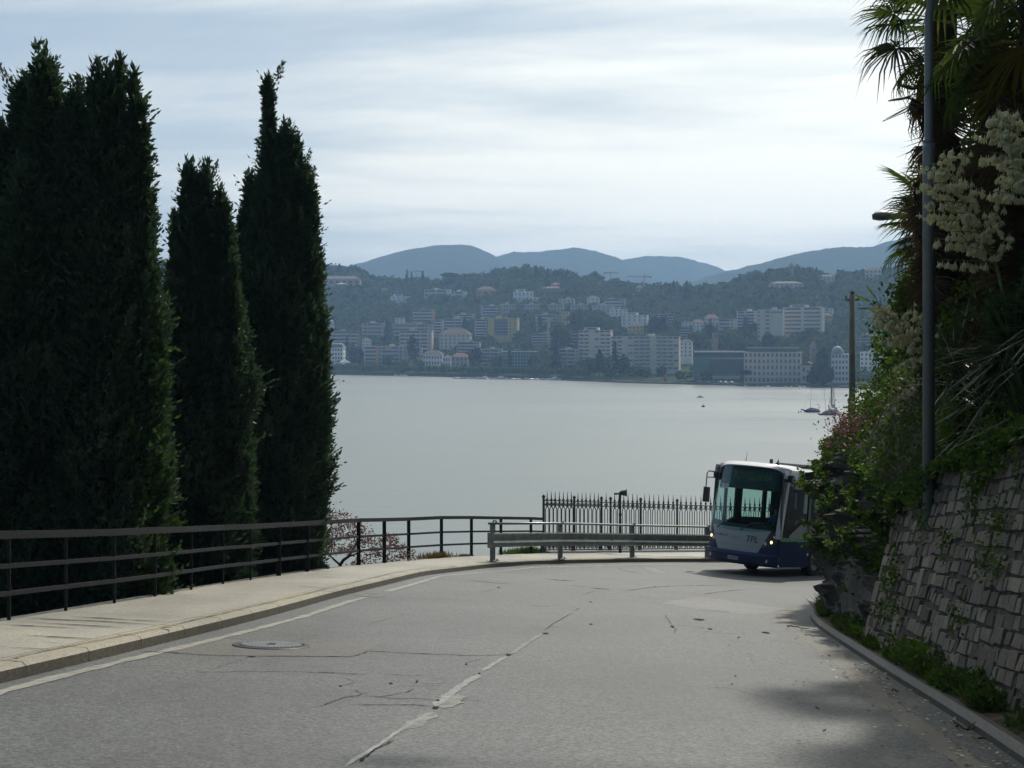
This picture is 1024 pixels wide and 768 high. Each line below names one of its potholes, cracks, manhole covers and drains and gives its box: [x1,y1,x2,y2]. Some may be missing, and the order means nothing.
crack [619,568,746,634]
manhole cover [232,641,310,650]
crack [145,651,506,707]
